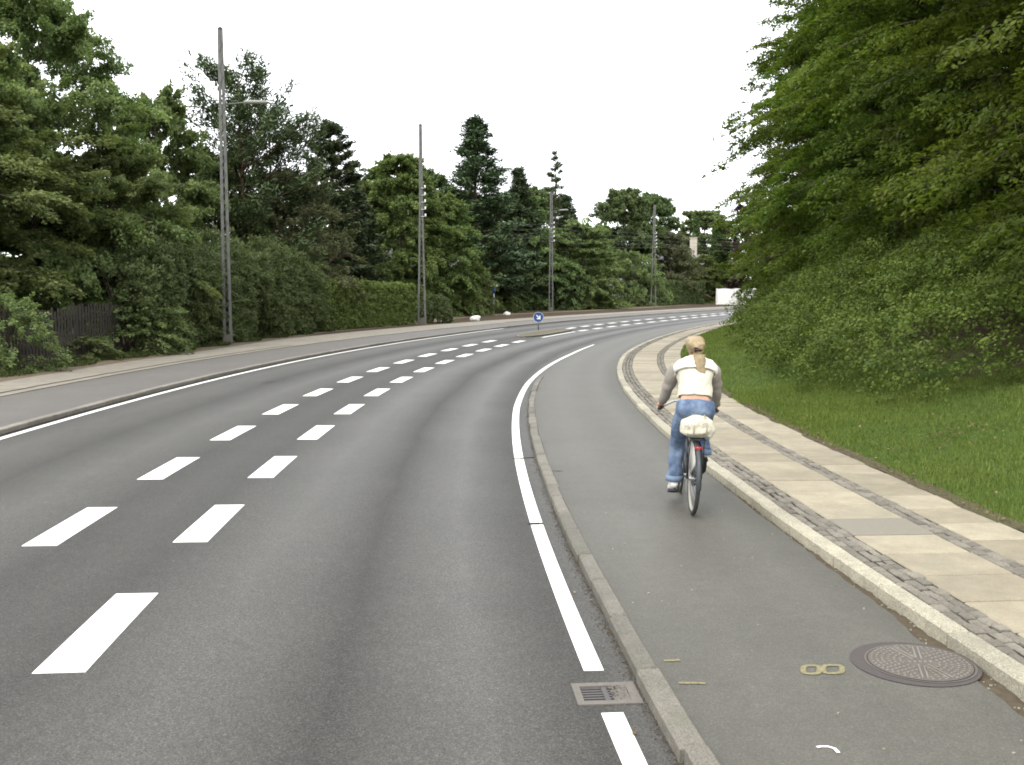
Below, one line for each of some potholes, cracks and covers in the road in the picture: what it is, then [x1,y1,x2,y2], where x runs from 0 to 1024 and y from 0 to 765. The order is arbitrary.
drain grate [571,681,644,706]
manhole cover [850,642,982,687]
